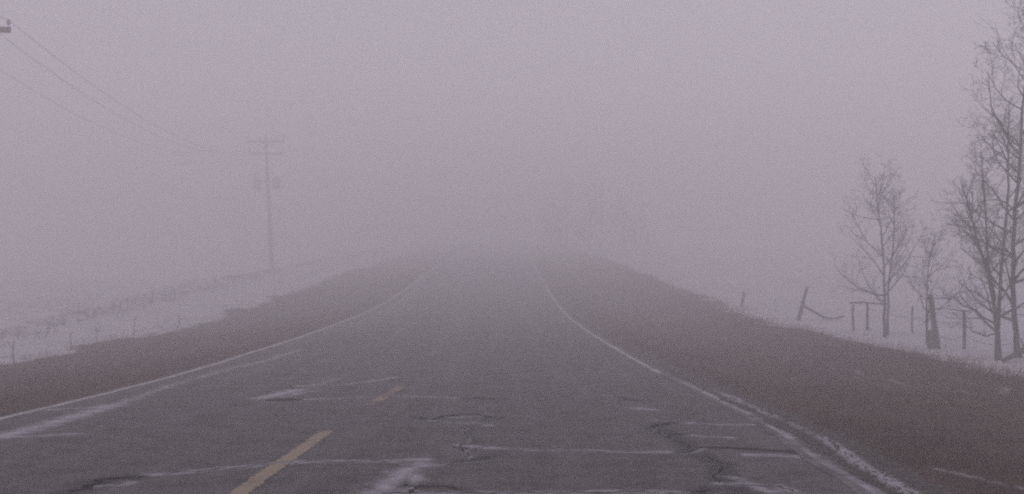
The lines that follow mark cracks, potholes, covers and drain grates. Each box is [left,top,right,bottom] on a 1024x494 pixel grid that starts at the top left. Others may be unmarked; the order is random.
crack [307,377,799,494]
crack [67,459,419,494]
